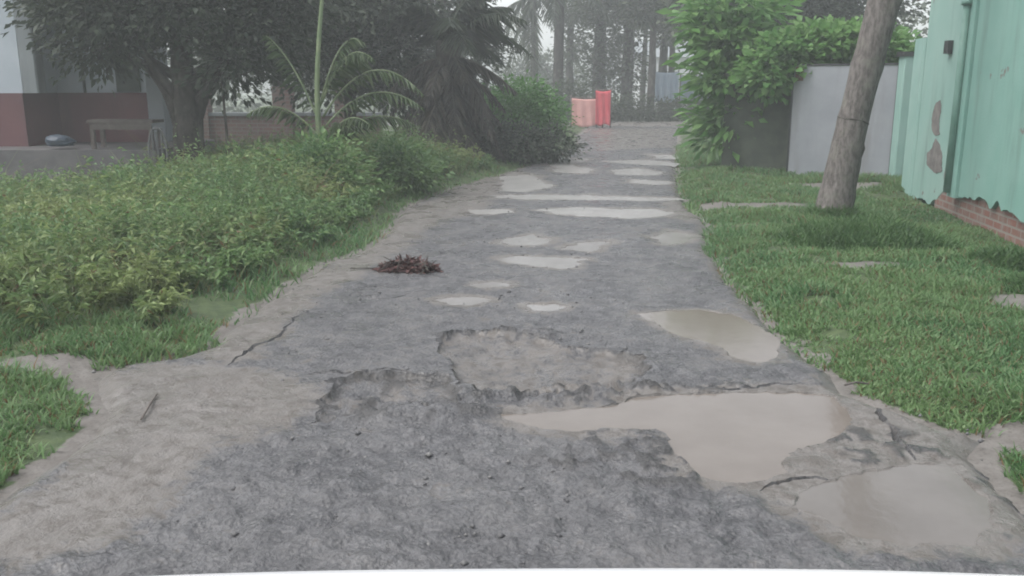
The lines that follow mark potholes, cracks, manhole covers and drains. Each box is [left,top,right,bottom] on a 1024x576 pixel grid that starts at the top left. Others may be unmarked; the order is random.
pothole [435,325,653,392]
pothole [497,234,552,245]
crack [759,476,828,491]
pothole [498,391,852,483]
pothole [535,207,677,219]
pothole [311,370,463,423]
pothole [650,231,703,245]
pothole [637,309,780,363]
pothole [526,302,566,311]
pothole [792,462,994,547]
pothole [561,241,612,252]
crack [227,313,412,376]
